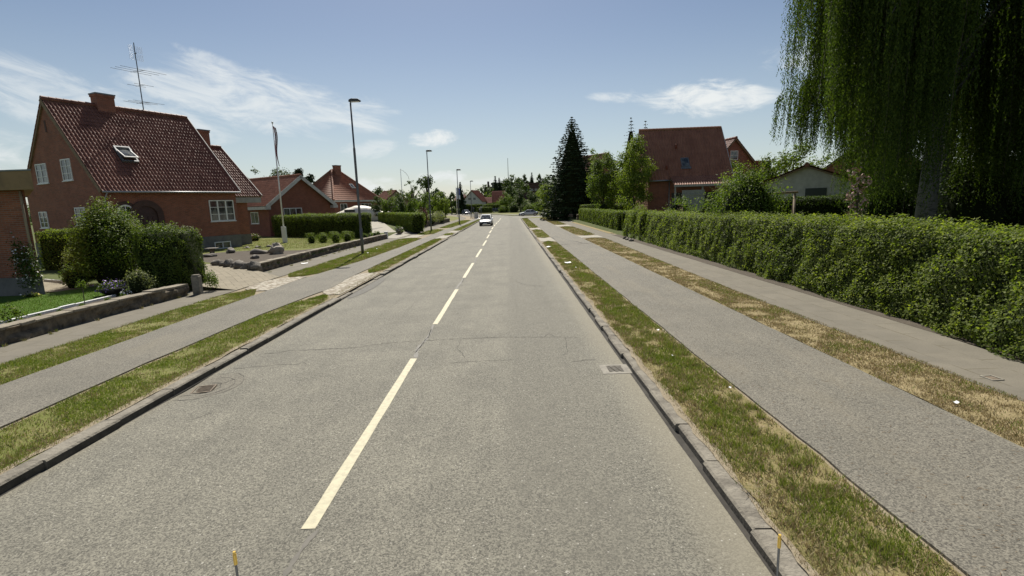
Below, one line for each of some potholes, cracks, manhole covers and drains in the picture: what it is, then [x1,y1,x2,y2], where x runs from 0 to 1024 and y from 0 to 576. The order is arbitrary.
drain grate [190,384,217,394]
drain grate [599,364,632,374]
